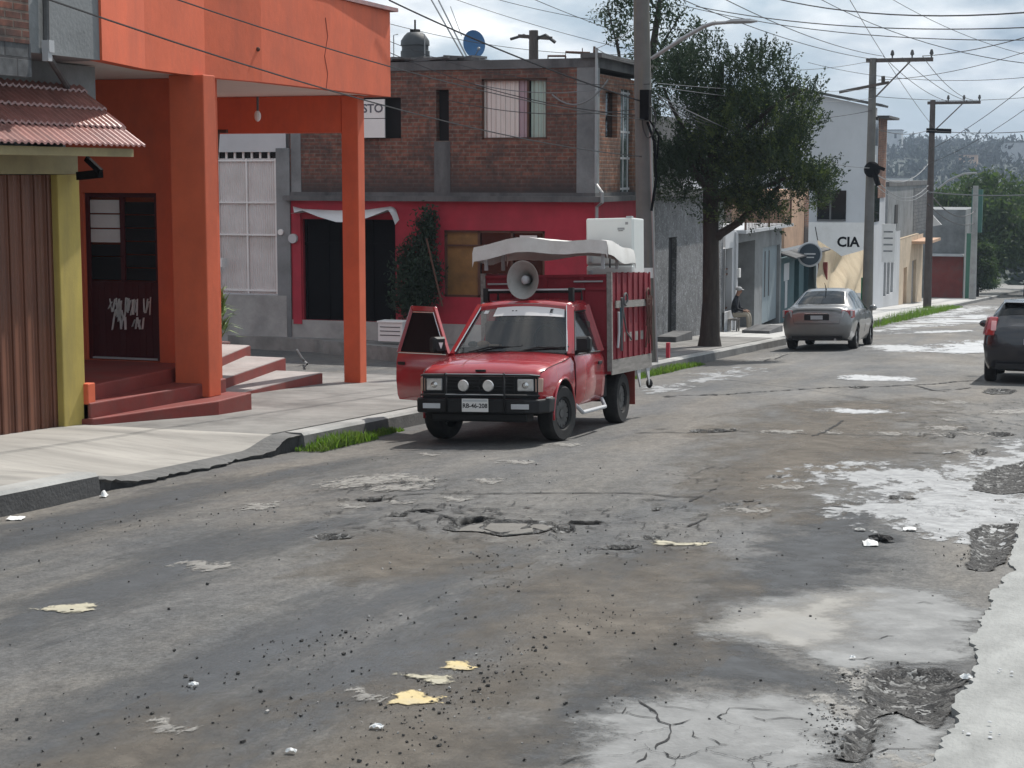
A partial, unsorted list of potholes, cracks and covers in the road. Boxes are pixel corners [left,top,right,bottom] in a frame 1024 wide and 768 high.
pothole [836,666,967,763]
pothole [453,516,495,526]
crack [620,700,721,762]
pothole [965,523,1018,572]
pothole [972,461,1024,495]
pothole [442,519,559,537]
pothole [315,533,352,541]
